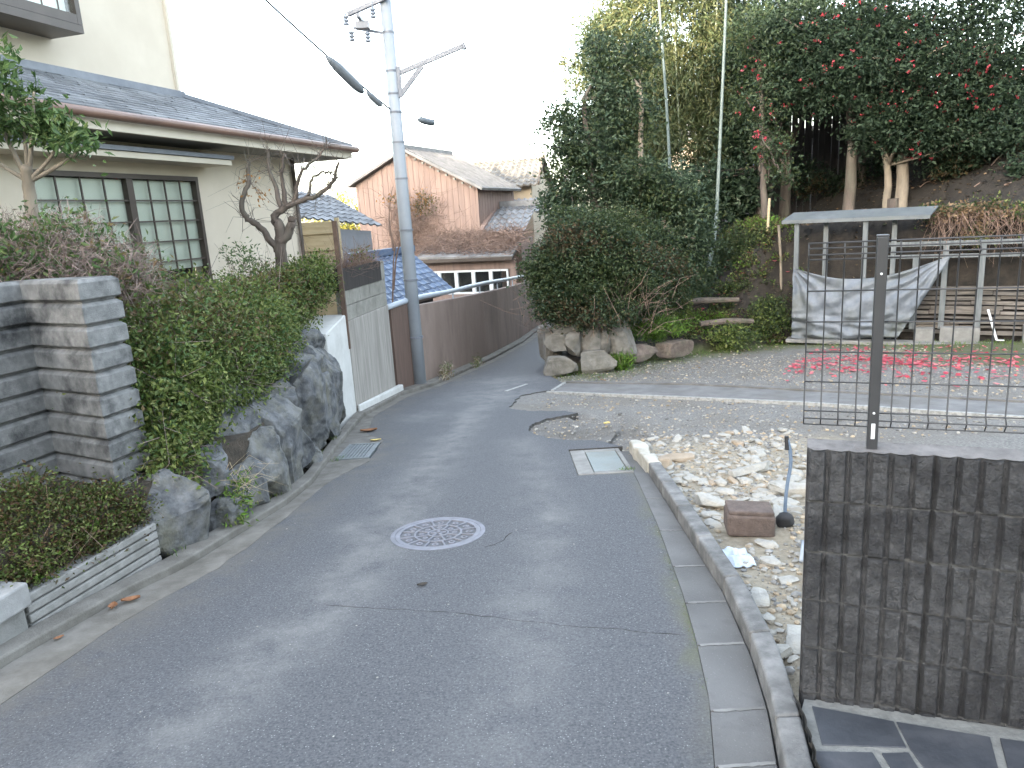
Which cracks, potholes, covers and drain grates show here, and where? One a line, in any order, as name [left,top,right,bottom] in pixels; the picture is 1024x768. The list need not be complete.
crack [331,605,680,635]
manhole cover [570,448,634,475]
drain grate [335,442,380,461]
manhole cover [390,517,485,551]
